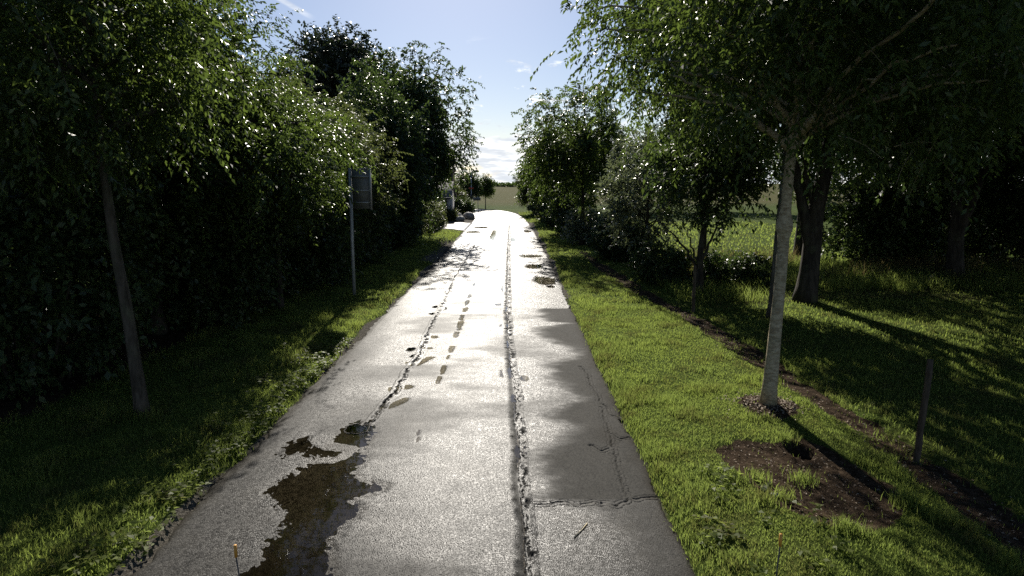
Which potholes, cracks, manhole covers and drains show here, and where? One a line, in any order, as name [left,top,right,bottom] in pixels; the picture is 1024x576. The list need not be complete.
crack [501,225,658,576]
crack [359,243,477,426]
